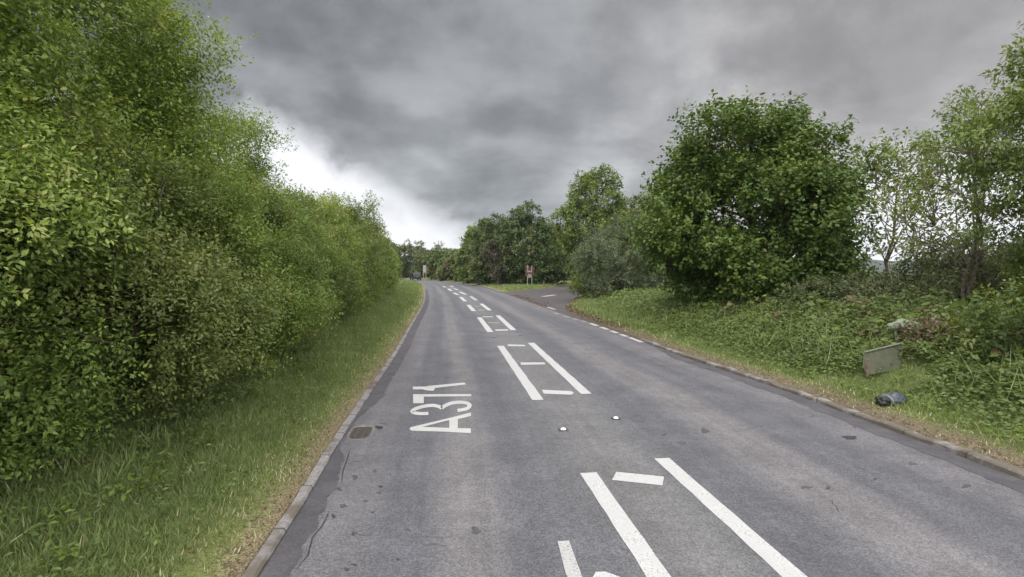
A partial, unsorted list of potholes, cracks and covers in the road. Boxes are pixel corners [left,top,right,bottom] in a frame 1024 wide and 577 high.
crack [296,511,329,570]
